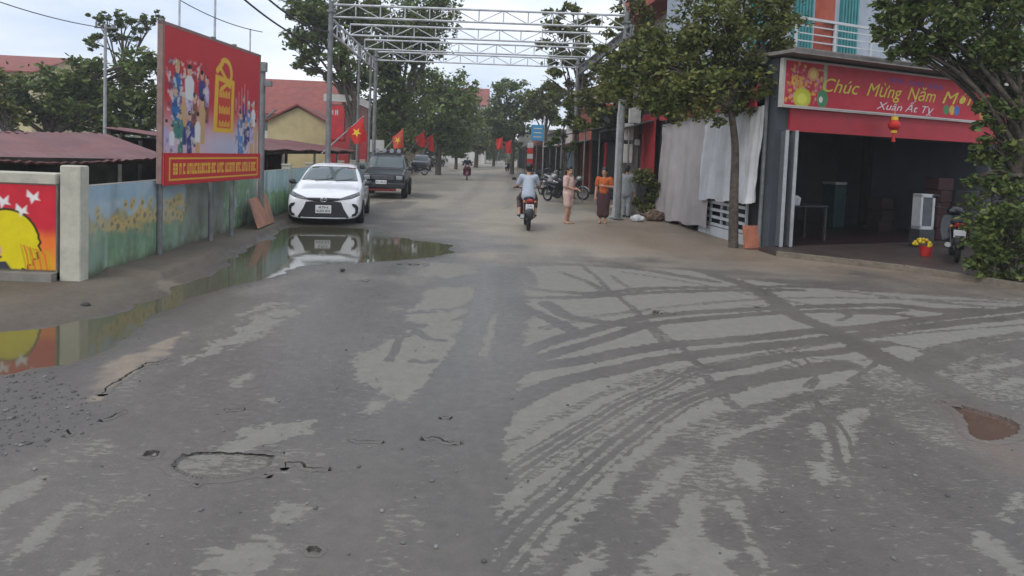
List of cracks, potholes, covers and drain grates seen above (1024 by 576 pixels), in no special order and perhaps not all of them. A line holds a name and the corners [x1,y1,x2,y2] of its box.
crack [94,358,173,422]
pothole [301,543,328,558]
crack [421,415,460,446]
pothole [941,402,1024,445]
pothole [137,448,166,460]
crack [183,446,330,479]
